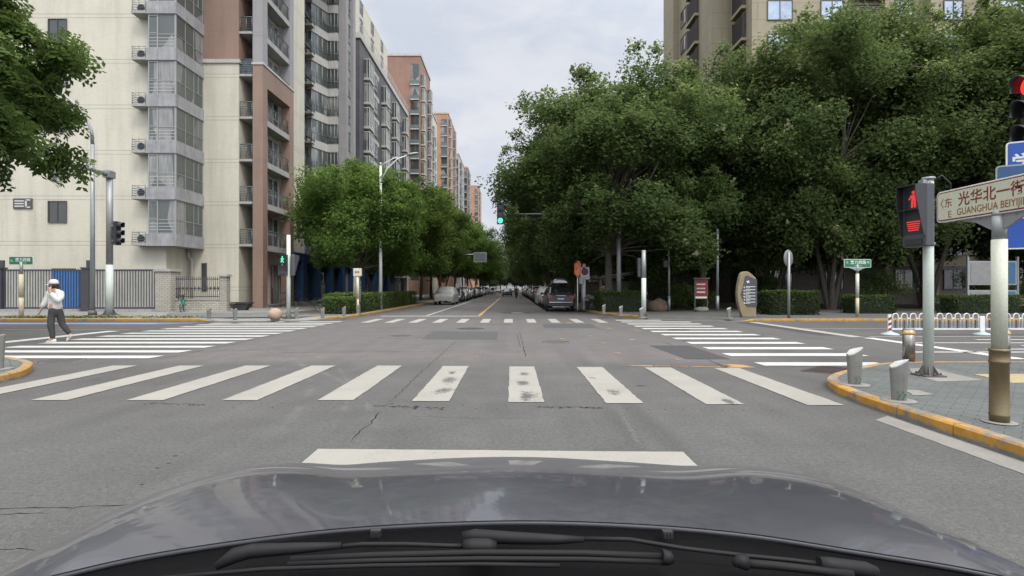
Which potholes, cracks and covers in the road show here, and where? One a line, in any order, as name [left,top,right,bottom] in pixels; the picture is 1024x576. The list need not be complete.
crack [352,341,522,440]
crack [0,504,129,515]
